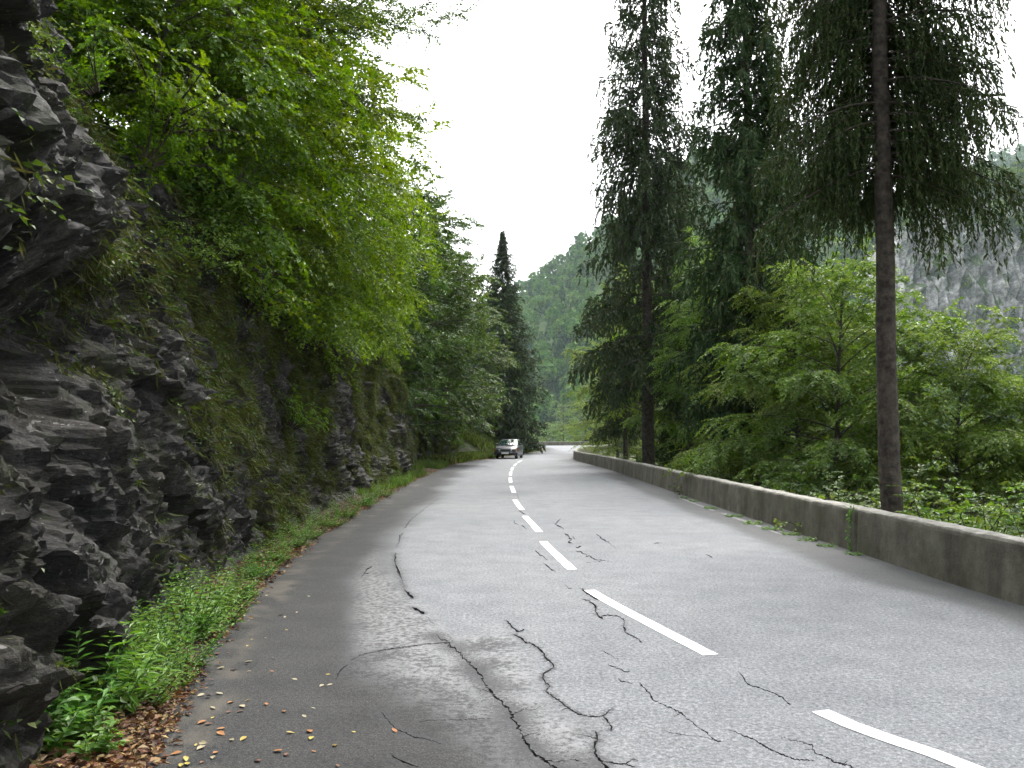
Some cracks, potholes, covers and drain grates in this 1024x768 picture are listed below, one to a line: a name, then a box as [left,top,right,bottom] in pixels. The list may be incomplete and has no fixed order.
crack [335,499,638,768]
crack [604,651,853,768]
